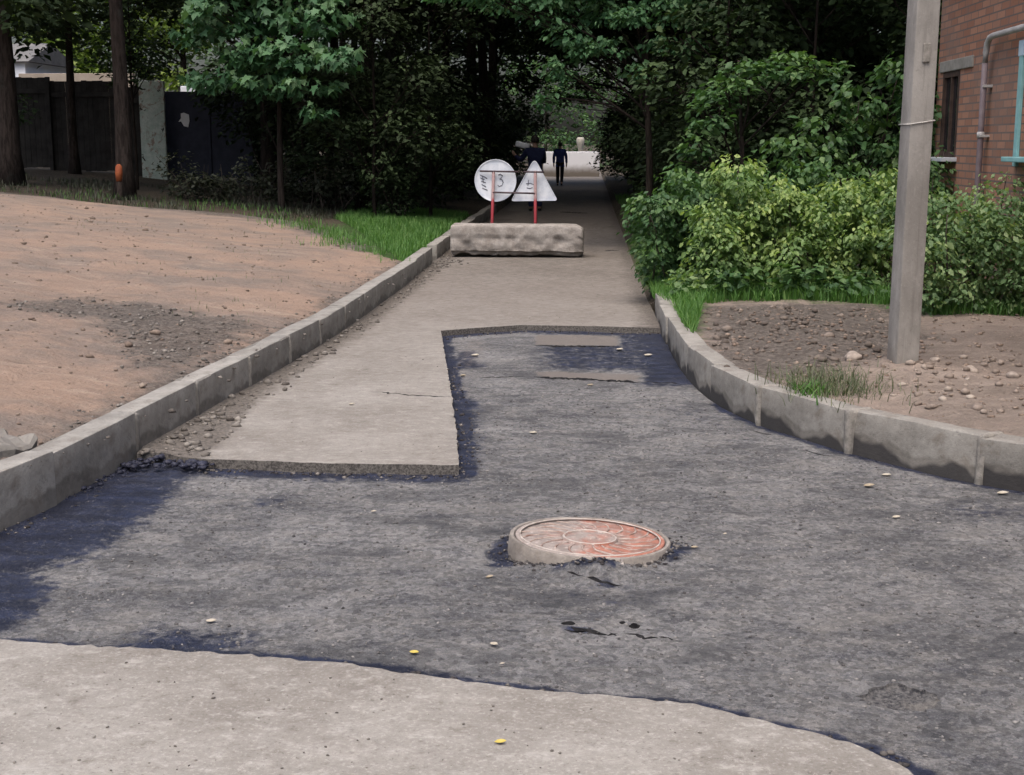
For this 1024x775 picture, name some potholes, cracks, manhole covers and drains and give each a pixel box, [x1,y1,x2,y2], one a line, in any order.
crack [567,571,620,586]
crack [567,627,678,641]
manhole cover [508,517,671,577]
